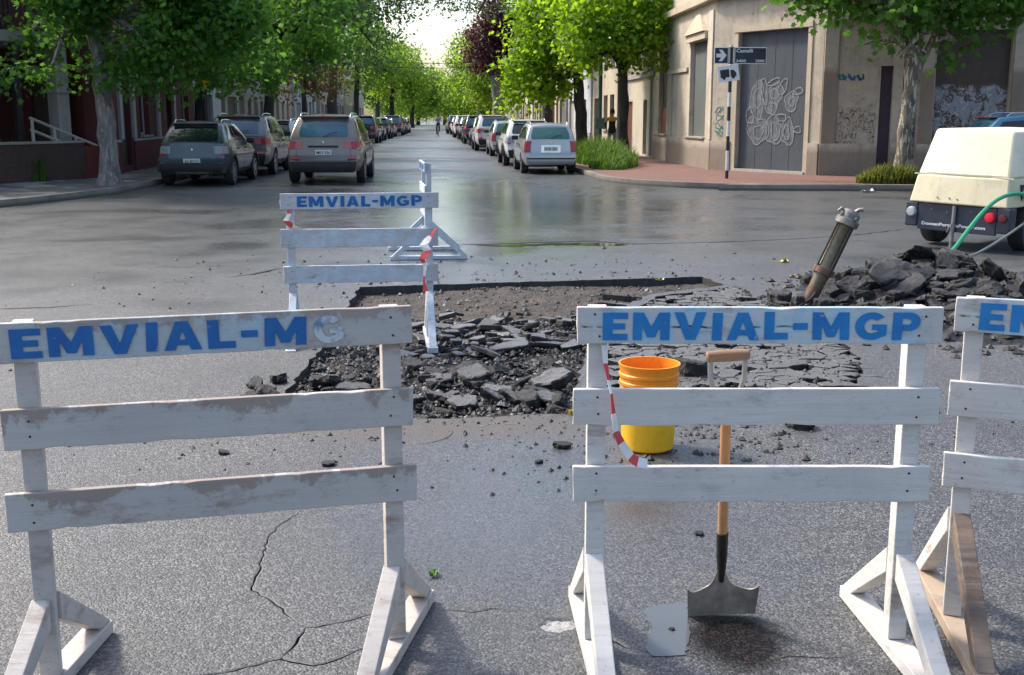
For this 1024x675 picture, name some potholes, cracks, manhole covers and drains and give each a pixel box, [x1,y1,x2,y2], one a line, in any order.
crack [232,268,280,277]
pothole [285,277,723,419]
crack [201,512,371,675]
